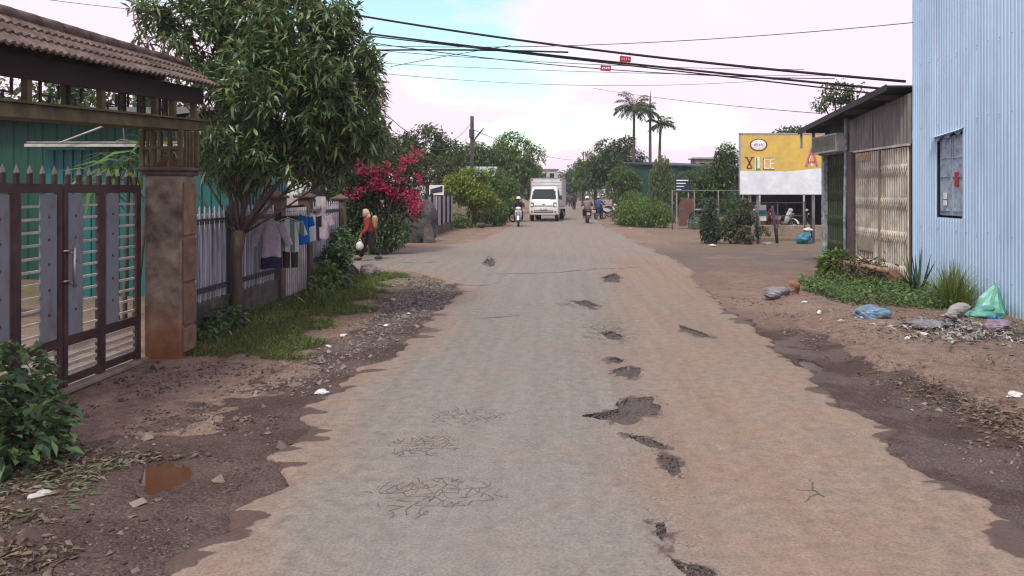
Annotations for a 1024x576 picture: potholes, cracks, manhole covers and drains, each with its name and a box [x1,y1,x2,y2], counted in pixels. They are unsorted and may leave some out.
pothole [604,365,649,381]
crack [361,477,503,518]
pothole [644,518,679,548]
pothole [570,300,604,310]
pothole [675,324,714,339]
pothole [595,330,629,342]
pothole [658,551,730,576]
pothole [619,432,676,452]
pothole [600,356,632,365]
pothole [651,452,691,480]
pothole [574,395,669,429]
crack [433,407,505,426]
